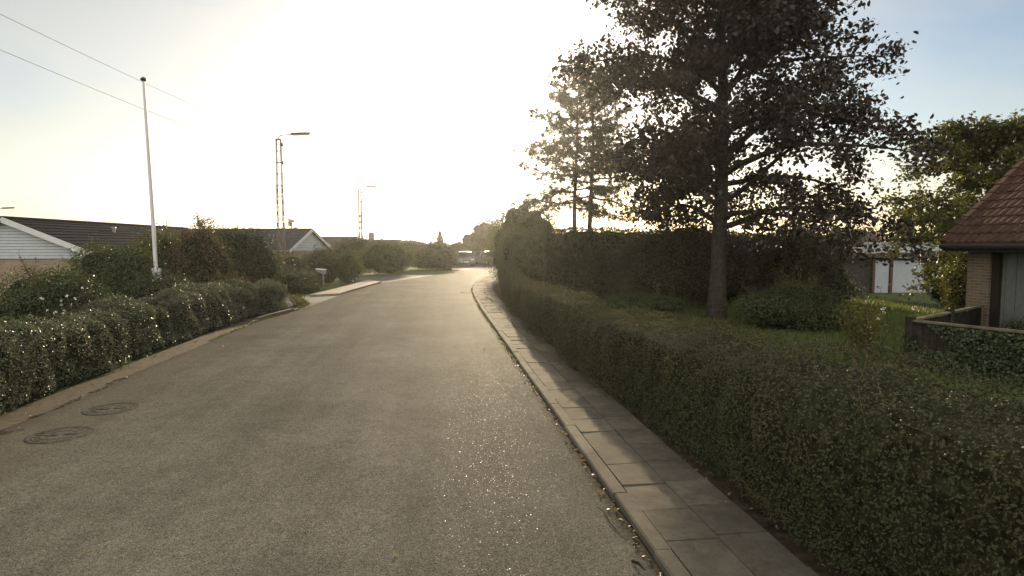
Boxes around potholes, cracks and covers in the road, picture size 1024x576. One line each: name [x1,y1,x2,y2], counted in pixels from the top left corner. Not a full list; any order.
manhole cover [81,402,141,416]
manhole cover [23,426,96,444]
